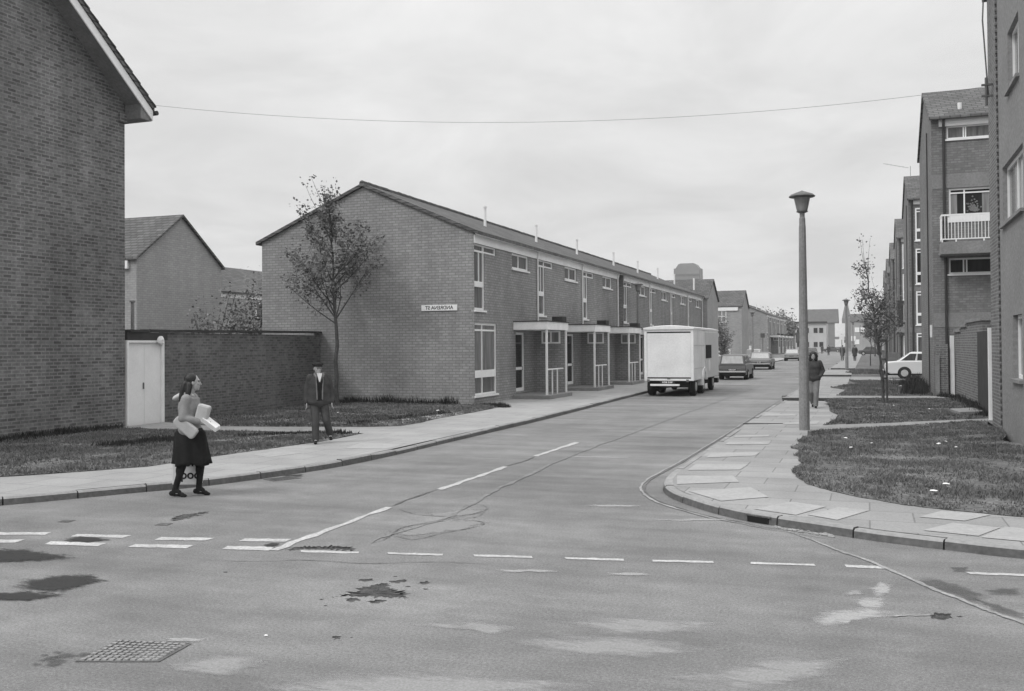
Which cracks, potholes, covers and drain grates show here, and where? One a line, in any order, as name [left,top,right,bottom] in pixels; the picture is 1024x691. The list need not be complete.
pothole [0,591,60,601]
pothole [333,583,406,598]
pothole [19,575,107,593]
pothole [930,612,952,620]
drain grate [745,513,771,525]
manhole cover [74,639,191,662]
pothole [172,512,208,521]
